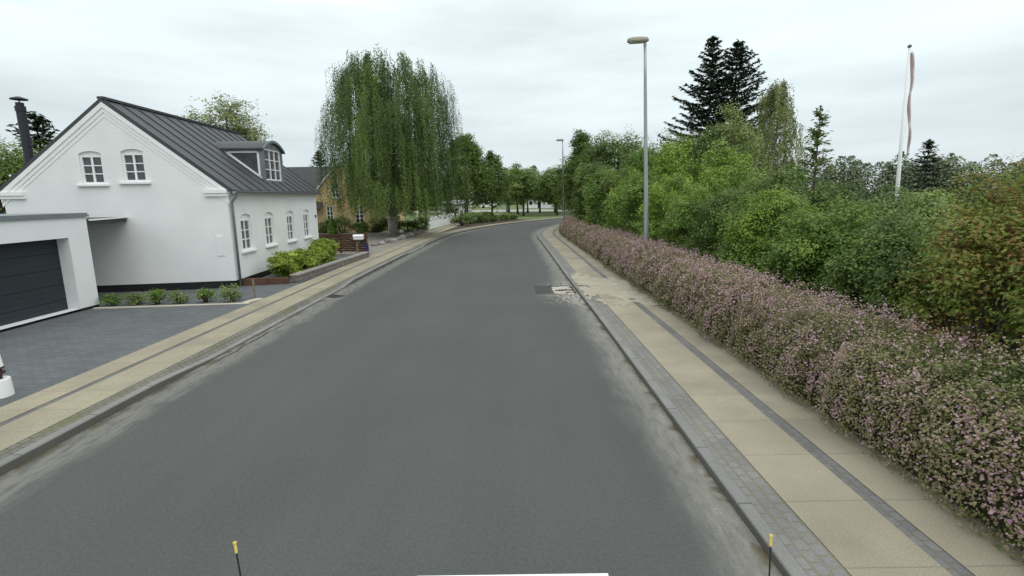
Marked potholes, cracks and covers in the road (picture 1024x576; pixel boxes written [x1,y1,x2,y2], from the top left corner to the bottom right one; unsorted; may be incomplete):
crack [206,322,292,368]
